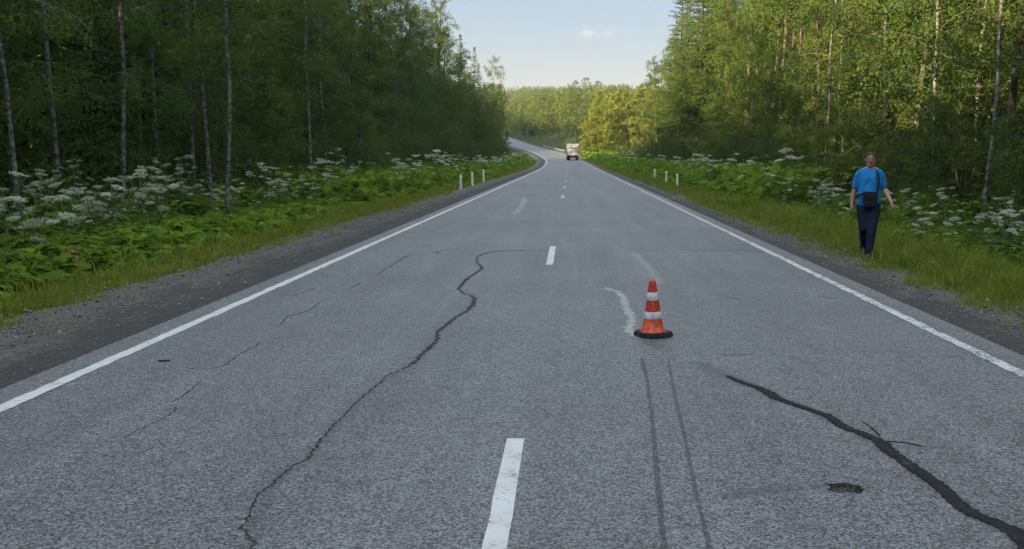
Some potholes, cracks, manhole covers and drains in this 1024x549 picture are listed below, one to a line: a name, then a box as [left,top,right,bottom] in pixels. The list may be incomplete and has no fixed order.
crack [237,248,529,549]
crack [726,375,1024,549]
crack [120,254,425,453]
pothole [826,483,864,494]
